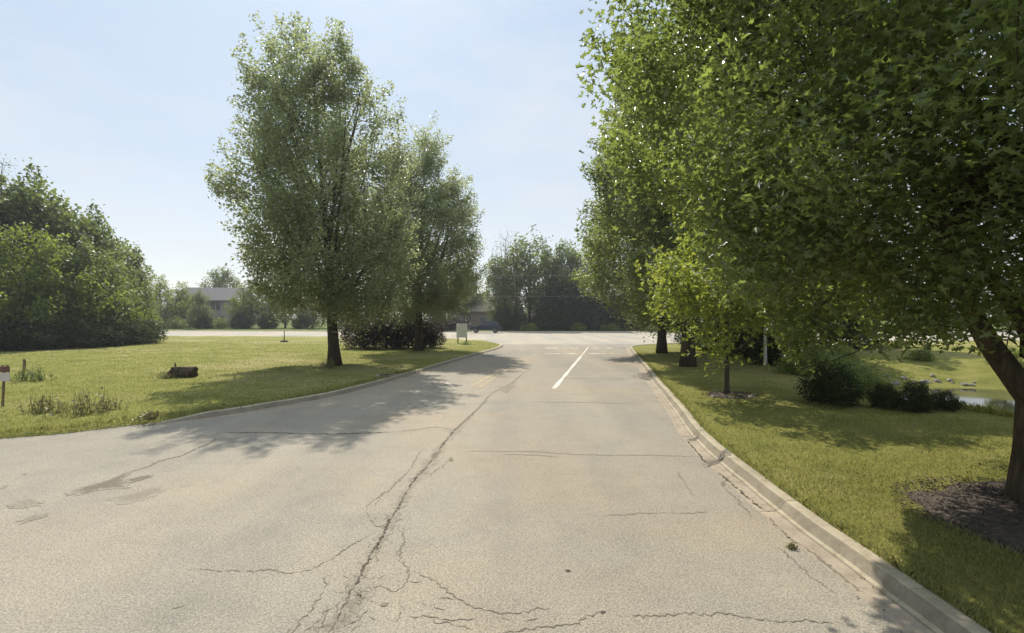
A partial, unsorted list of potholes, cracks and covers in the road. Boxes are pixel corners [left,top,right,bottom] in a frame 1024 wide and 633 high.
crack [475,372,525,412]
crack [189,454,604,633]
crack [627,611,852,627]
crack [499,442,859,593]
